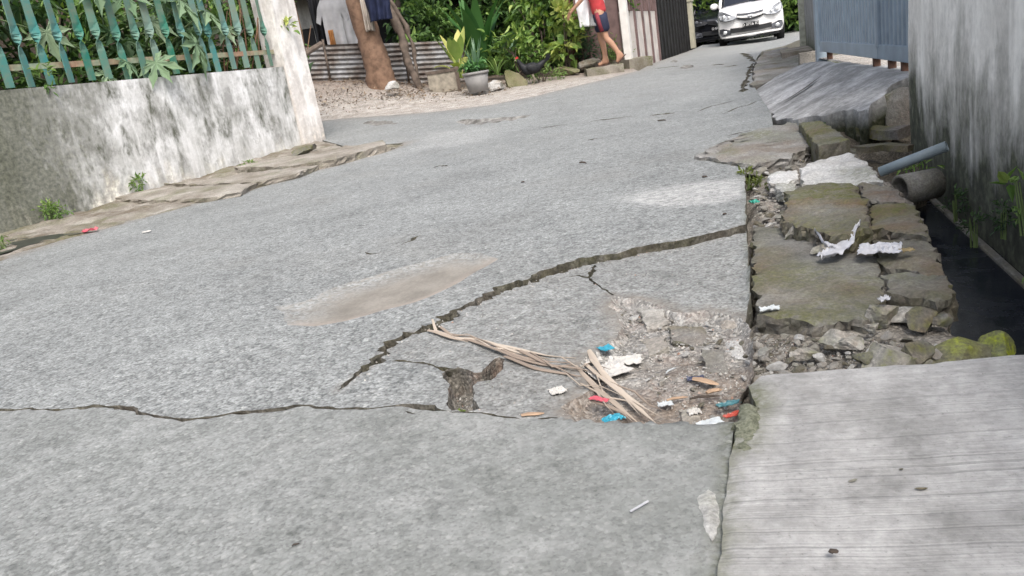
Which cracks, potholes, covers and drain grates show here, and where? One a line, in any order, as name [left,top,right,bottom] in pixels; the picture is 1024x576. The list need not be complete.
pothole [561,295,756,425]
crack [0,224,747,422]
pothole [442,357,505,413]
crack [701,53,756,112]
